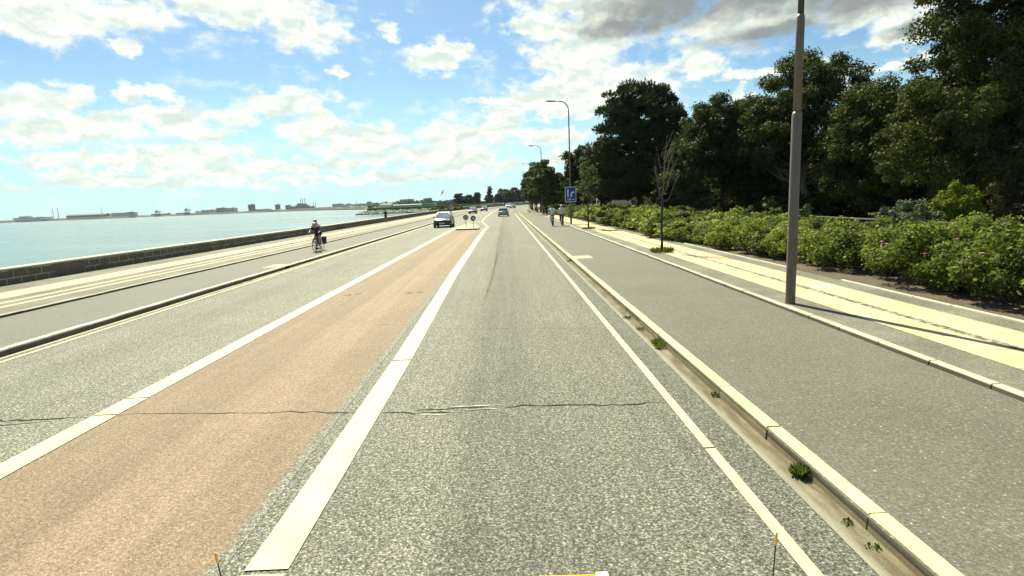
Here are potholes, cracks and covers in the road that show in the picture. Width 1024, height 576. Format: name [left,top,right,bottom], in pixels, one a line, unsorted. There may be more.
crack [0,402,649,425]
